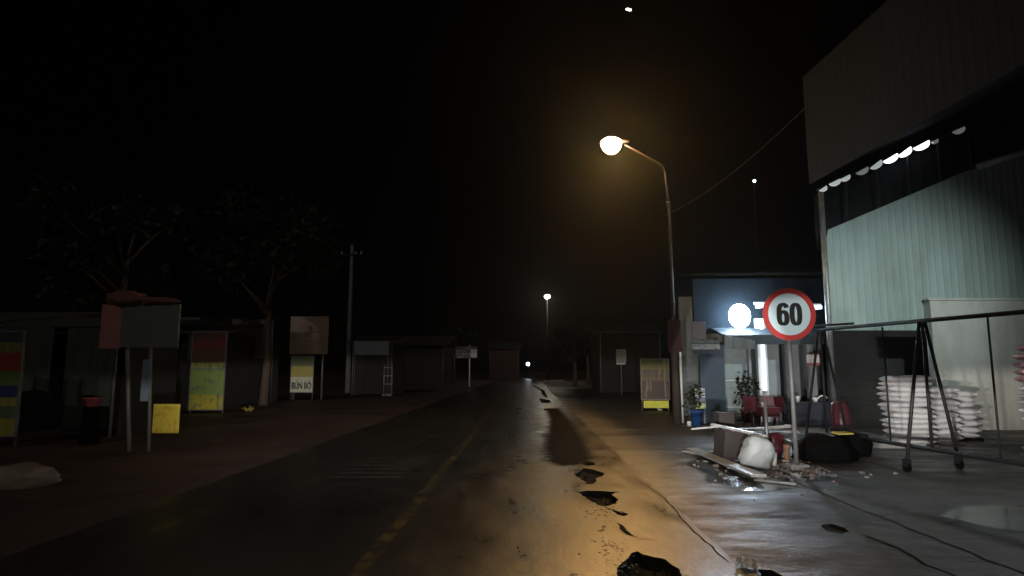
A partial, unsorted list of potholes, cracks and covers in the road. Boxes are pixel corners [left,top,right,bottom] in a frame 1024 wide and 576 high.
pothole [821,524,849,534]
pothole [574,468,606,483]
pothole [578,491,618,506]
pothole [617,551,682,576]
